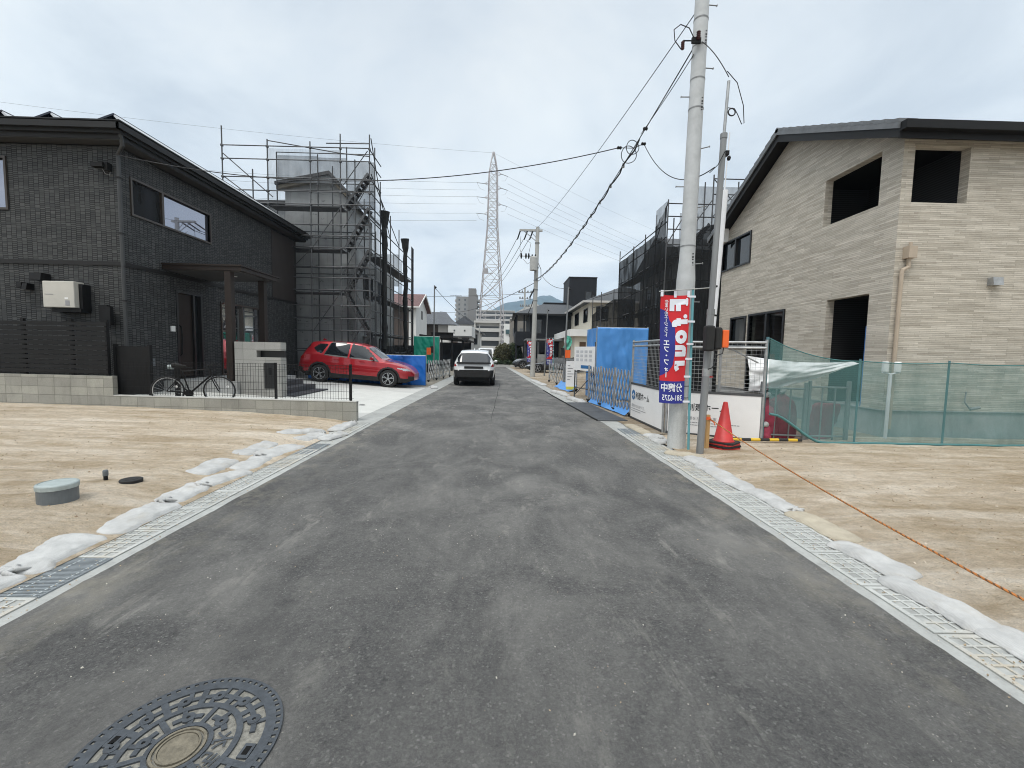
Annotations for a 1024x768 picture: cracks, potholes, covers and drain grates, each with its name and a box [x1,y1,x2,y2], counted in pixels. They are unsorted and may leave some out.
utility cover [118,476,143,484]
drain grate [0,558,113,599]
manhole cover [65,677,283,768]
drain grate [295,443,330,455]
